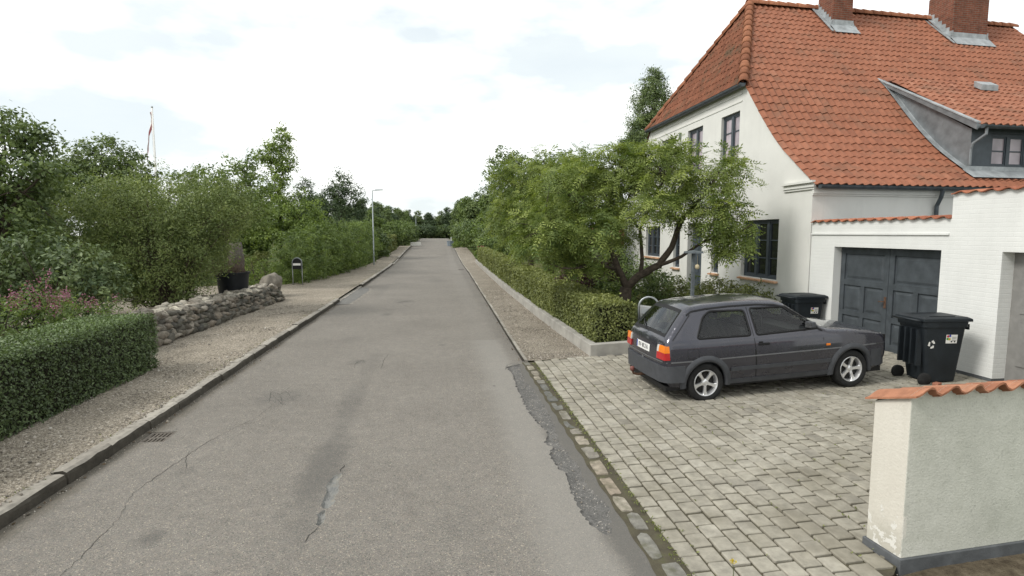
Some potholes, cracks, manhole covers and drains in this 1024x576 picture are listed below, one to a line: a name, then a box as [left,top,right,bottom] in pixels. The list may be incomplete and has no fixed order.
crack [60,389,289,576]
pothole [507,364,613,535]
drain grate [138,432,176,443]
